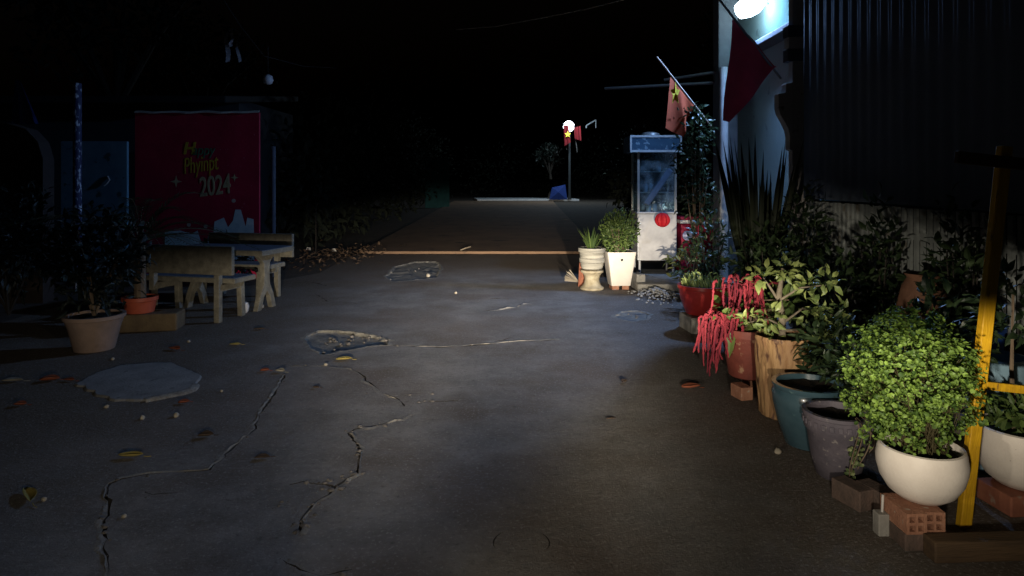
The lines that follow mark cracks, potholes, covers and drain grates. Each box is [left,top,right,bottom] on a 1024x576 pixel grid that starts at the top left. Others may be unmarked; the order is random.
crack [94,364,456,576]
pothole [384,261,444,282]
crack [391,337,560,348]
crack [479,298,531,311]
pothole [299,330,395,355]
